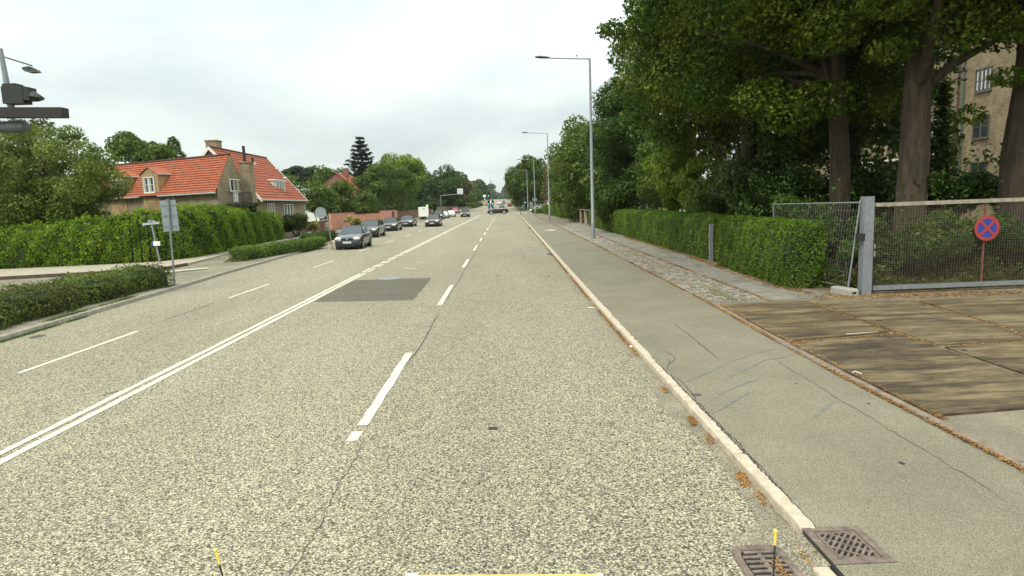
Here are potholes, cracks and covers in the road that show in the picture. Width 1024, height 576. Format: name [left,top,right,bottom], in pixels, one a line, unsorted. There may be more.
crack [649,351,814,524]
drain grate [802,526,897,565]
drain grate [731,544,804,576]
